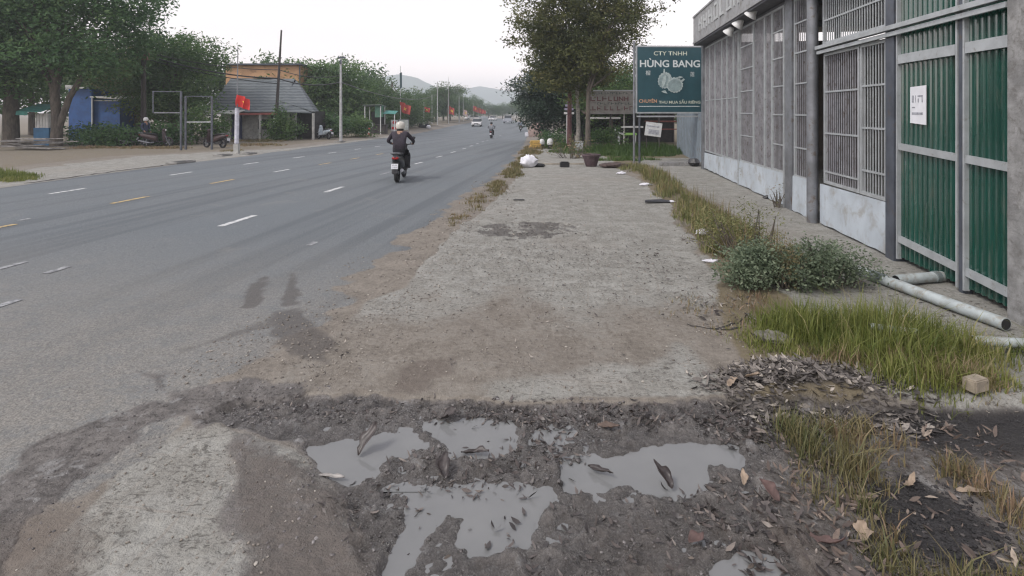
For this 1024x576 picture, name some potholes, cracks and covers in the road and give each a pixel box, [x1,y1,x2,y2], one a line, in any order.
pothole [187,388,827,576]
